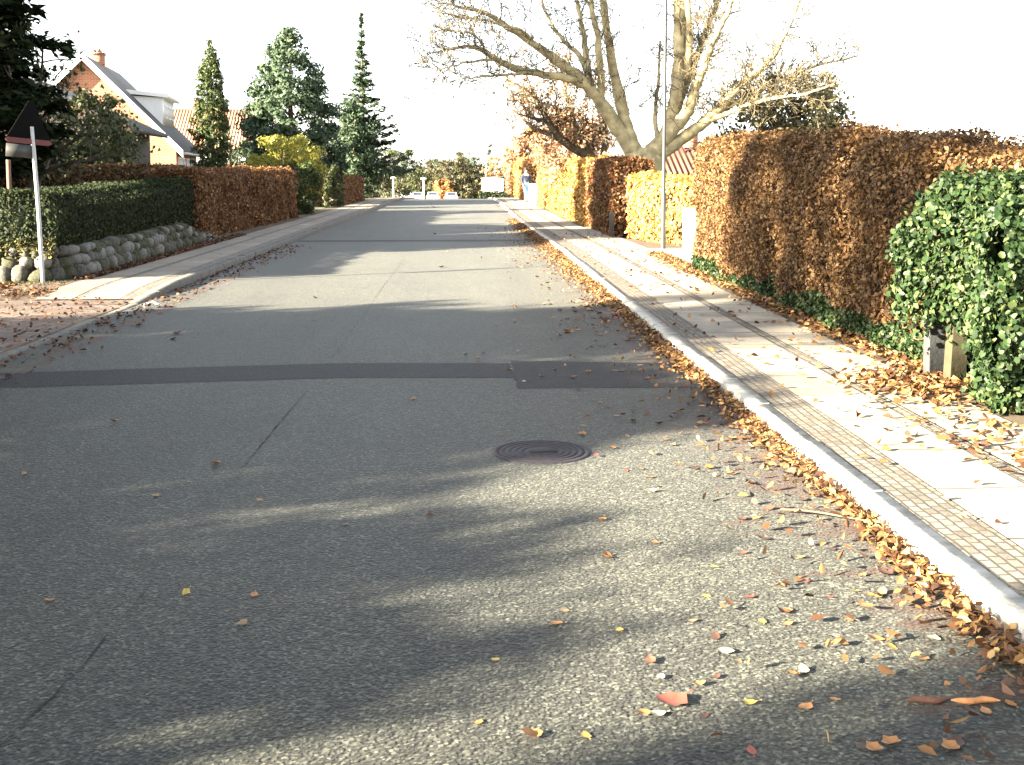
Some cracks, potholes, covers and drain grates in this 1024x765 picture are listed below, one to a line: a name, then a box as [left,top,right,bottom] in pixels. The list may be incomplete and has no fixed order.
manhole cover [492,440,591,464]
